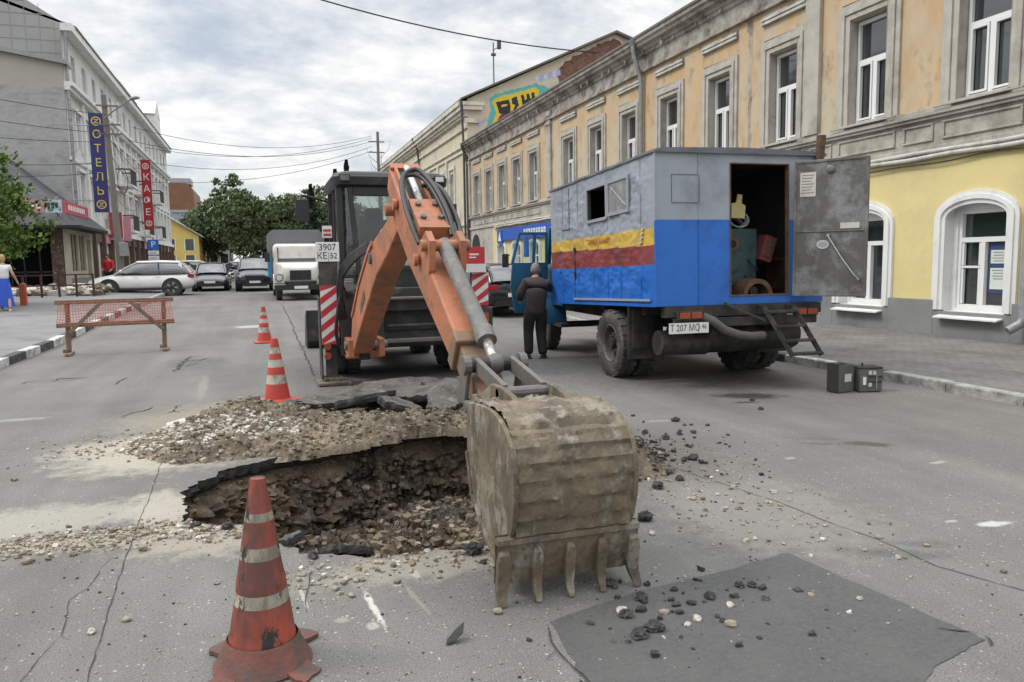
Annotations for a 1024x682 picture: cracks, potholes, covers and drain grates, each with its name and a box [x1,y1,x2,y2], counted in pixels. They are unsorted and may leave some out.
crack [20,463,162,682]
crack [173,355,206,371]
pothole [180,436,487,557]
crack [670,466,1023,590]
crack [282,305,315,376]
